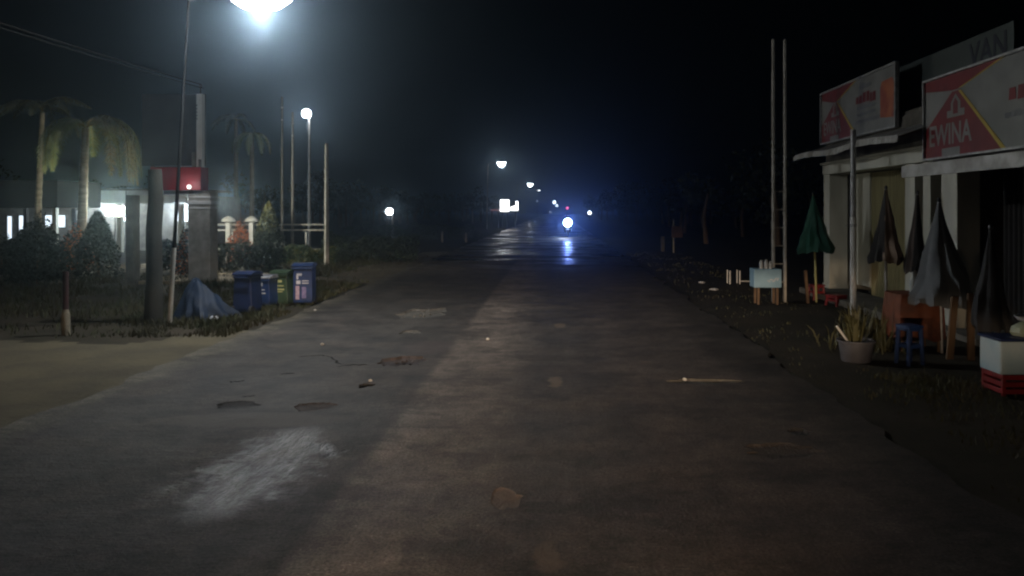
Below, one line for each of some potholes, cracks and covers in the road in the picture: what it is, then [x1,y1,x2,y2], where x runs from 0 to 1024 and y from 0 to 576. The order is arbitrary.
pothole [216,401,261,409]
pothole [377,356,427,366]
crack [281,355,367,374]
pothole [294,402,338,412]
